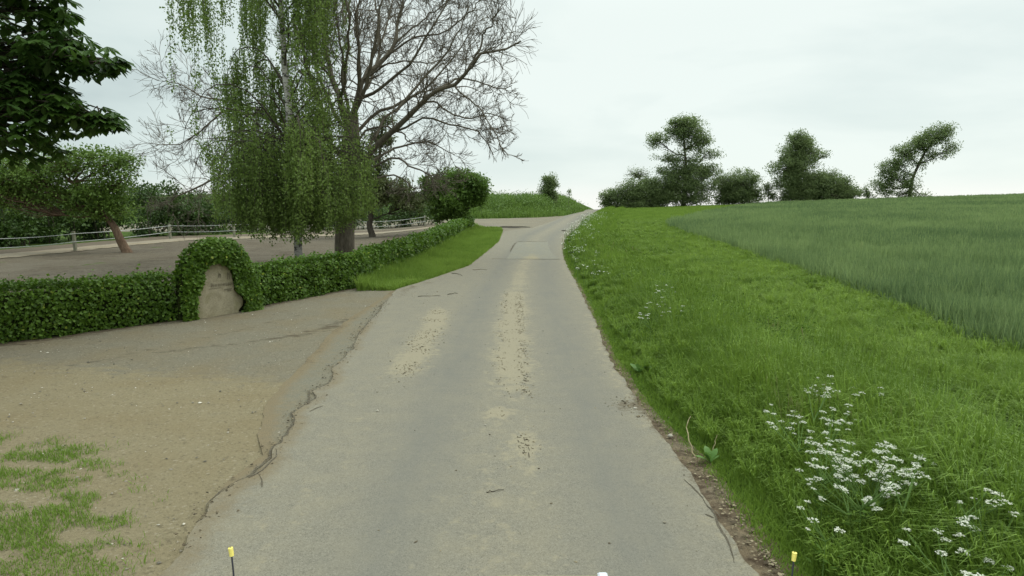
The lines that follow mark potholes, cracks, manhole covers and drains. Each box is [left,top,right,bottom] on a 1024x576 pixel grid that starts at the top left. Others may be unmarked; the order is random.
crack [197,302,385,522]
